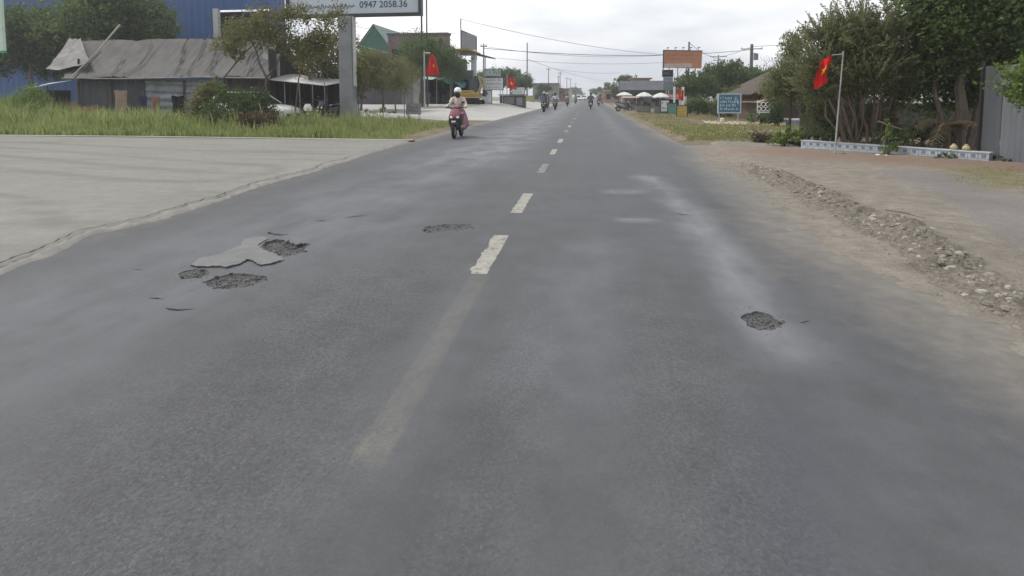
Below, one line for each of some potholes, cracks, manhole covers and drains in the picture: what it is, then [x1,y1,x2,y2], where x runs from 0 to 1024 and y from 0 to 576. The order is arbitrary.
pothole [731,307,787,335]
pothole [188,270,280,292]
pothole [261,236,315,257]
pothole [175,268,210,280]
pothole [406,222,475,234]
